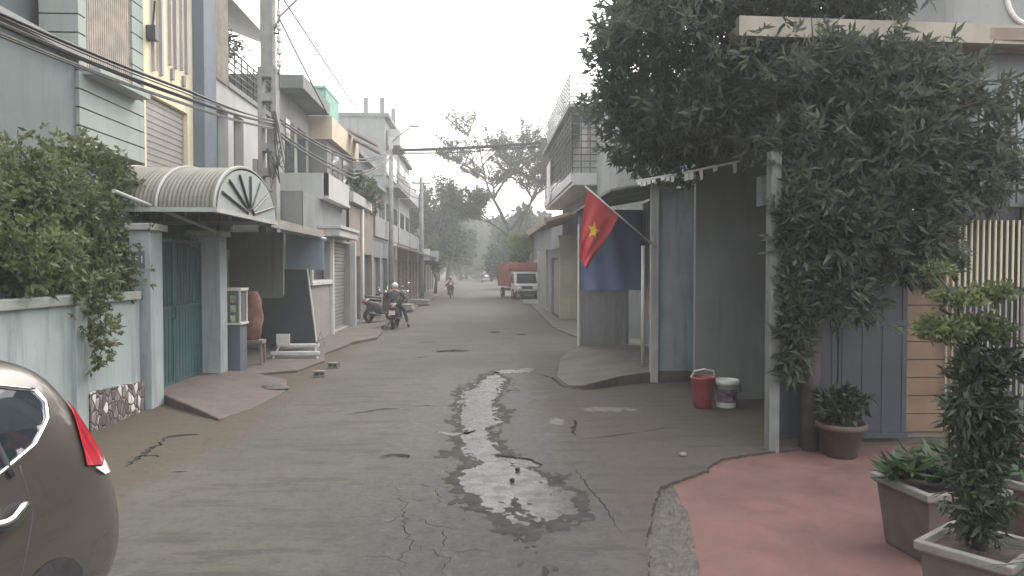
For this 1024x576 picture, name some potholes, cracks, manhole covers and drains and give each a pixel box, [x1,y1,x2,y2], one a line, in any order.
crack [345,405,429,415]
crack [570,420,674,440]
crack [362,480,490,575]
crack [125,434,200,473]
crack [573,466,622,534]
